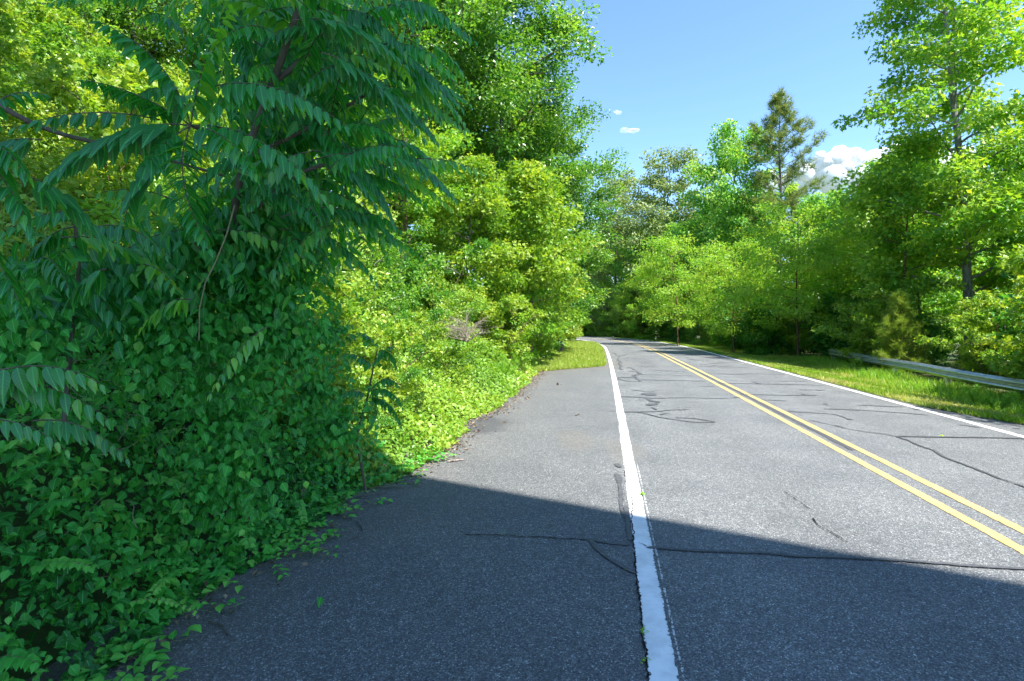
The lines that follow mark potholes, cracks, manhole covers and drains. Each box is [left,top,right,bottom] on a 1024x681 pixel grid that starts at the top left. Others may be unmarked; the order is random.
crack [618,420,650,681]
